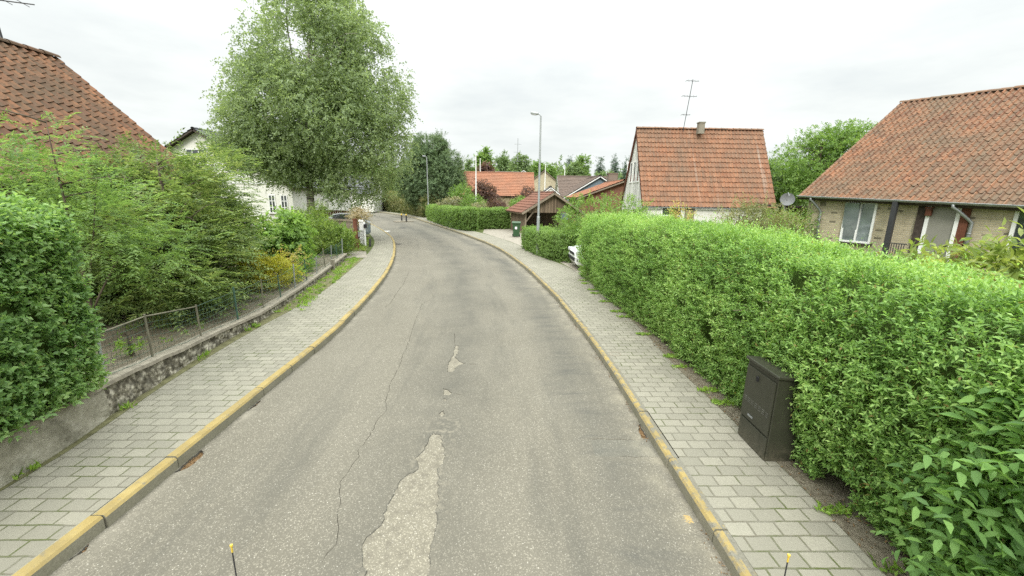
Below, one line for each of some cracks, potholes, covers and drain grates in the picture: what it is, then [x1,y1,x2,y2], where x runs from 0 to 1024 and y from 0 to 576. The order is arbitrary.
crack [322,301,427,562]
pothole [174,450,204,473]
pothole [447,345,465,372]
